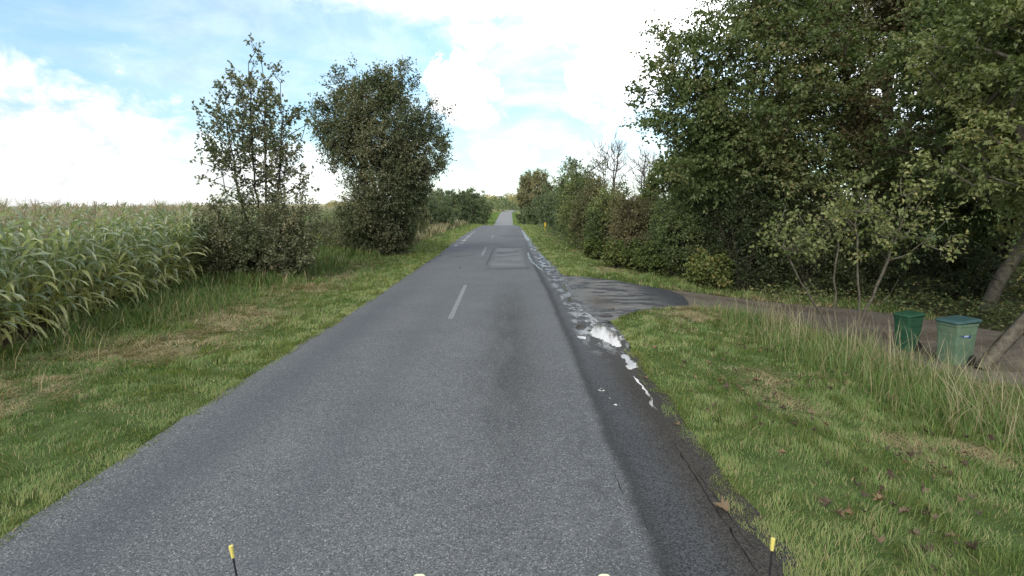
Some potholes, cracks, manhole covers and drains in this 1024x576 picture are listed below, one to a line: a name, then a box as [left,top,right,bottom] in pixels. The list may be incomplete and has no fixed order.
pothole [589,324,623,347]
pothole [620,353,639,370]
